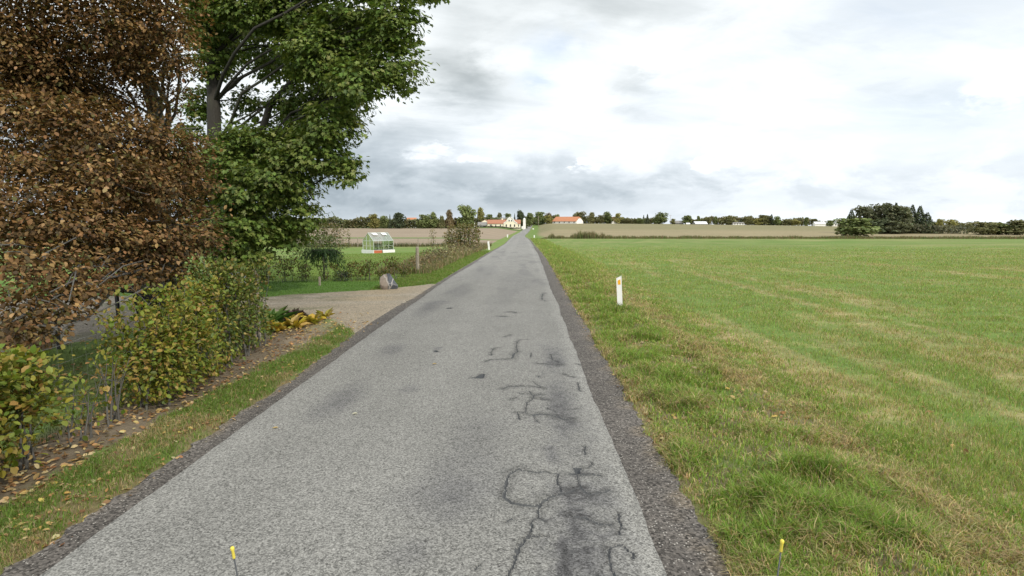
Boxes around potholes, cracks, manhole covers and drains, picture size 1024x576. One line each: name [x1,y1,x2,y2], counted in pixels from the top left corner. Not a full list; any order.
crack [484,334,585,423]
crack [502,446,635,576]
